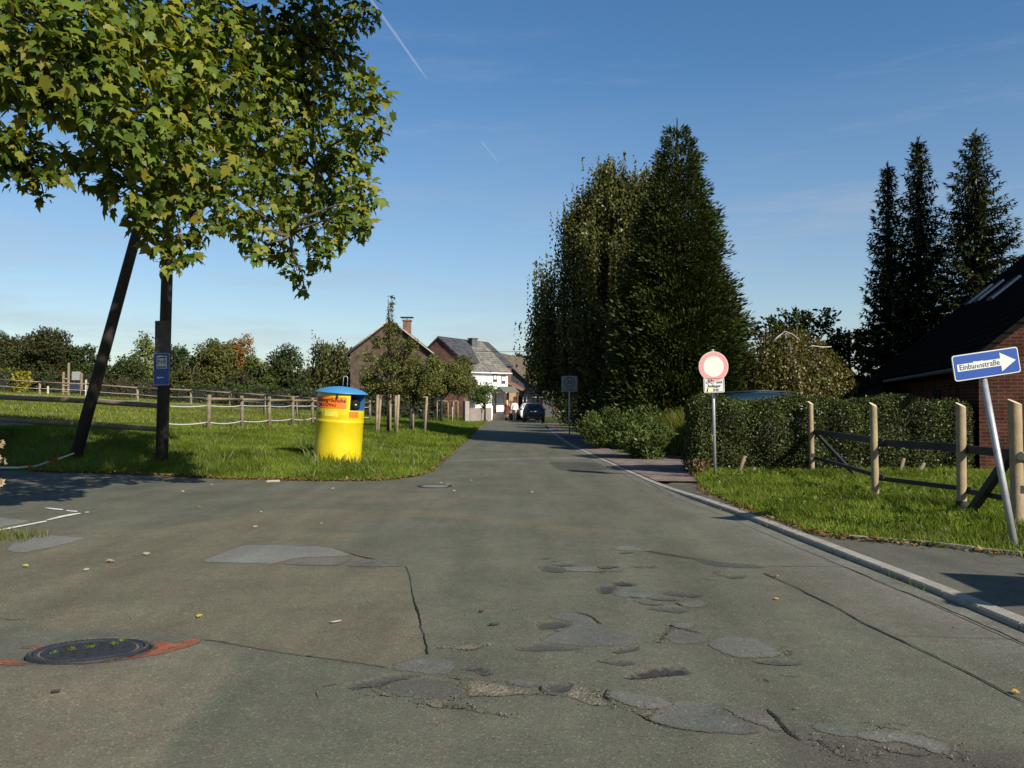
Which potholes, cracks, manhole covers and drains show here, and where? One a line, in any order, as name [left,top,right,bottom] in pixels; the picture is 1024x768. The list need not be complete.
pothole [538,565,565,573]
pothole [823,742,886,760]
pothole [542,681,575,693]
manhole cover [25,638,150,665]
pothole [462,664,492,675]
pothole [346,672,420,689]
pothole [622,666,690,680]
crack [405,566,429,654]
pothole [873,745,932,756]
pothole [426,700,468,709]
